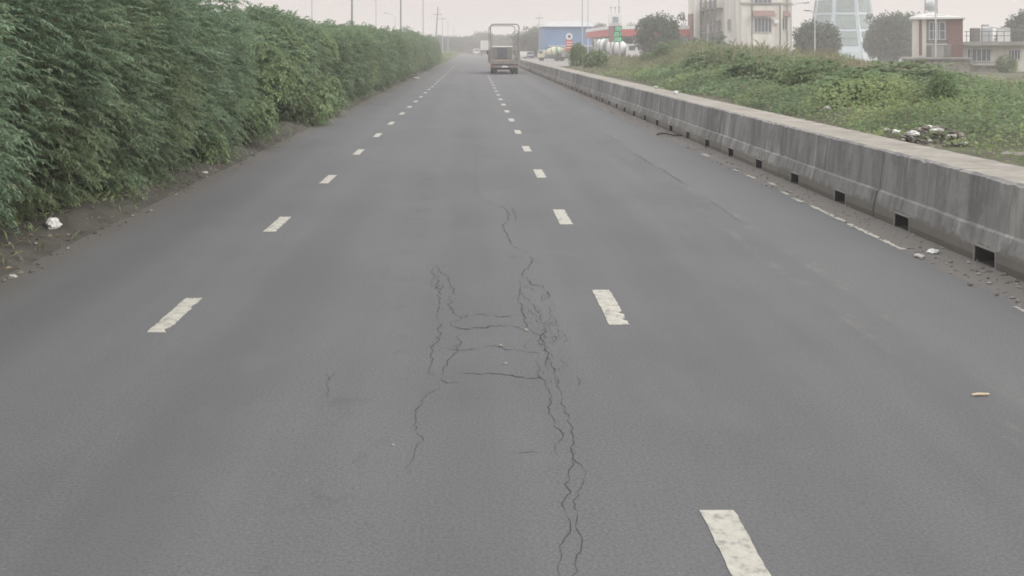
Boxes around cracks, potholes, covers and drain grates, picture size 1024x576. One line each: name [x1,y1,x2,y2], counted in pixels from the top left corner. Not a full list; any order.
crack [407,151,586,576]
